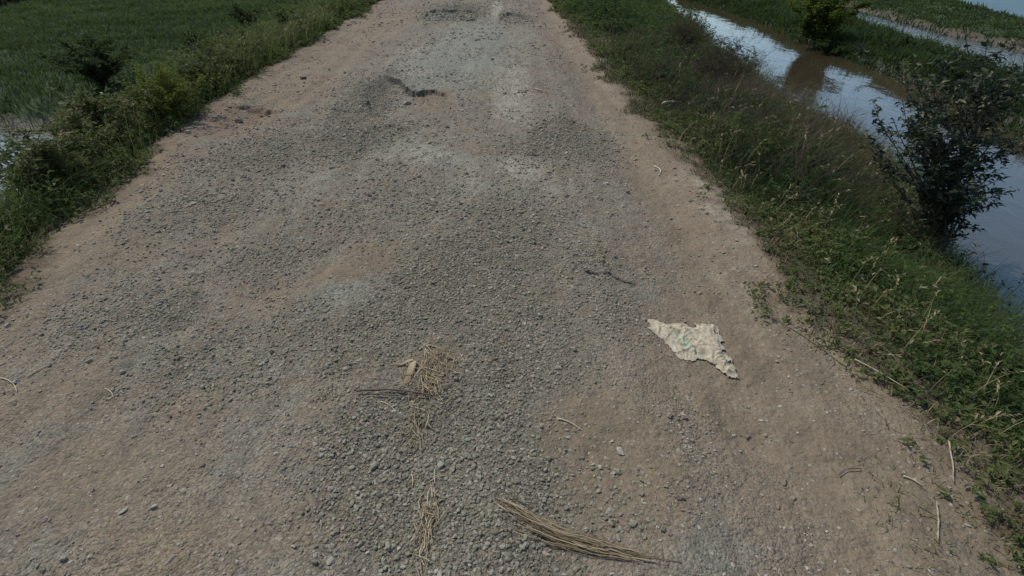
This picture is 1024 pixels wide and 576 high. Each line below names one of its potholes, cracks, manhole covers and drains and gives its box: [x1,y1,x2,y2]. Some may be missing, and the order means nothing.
pothole [499,13,535,24]
crack [587,257,637,286]
pothole [362,74,447,117]
pothole [424,9,481,21]
